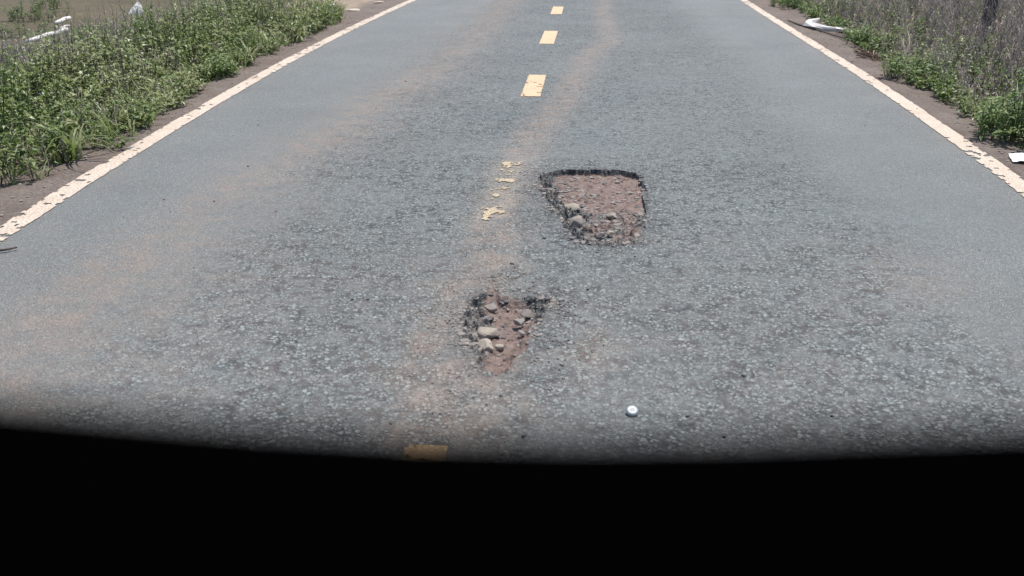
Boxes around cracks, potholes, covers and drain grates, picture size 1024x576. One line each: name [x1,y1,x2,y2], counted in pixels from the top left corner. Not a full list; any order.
pothole [527,168,656,251]
